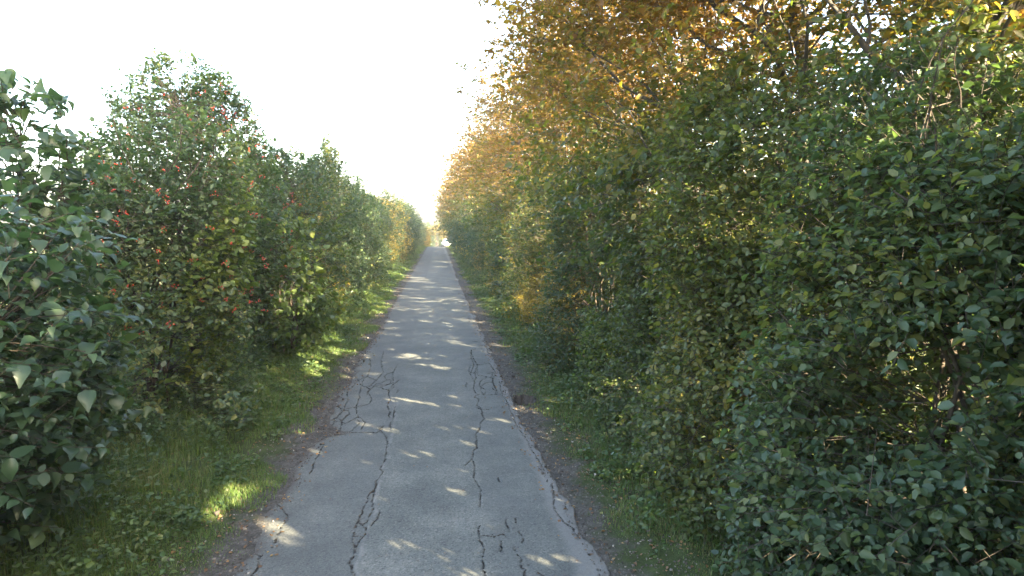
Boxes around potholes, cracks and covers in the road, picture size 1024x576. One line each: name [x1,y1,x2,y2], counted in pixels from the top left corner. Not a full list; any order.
crack [466,341,600,575]
crack [332,356,398,576]
